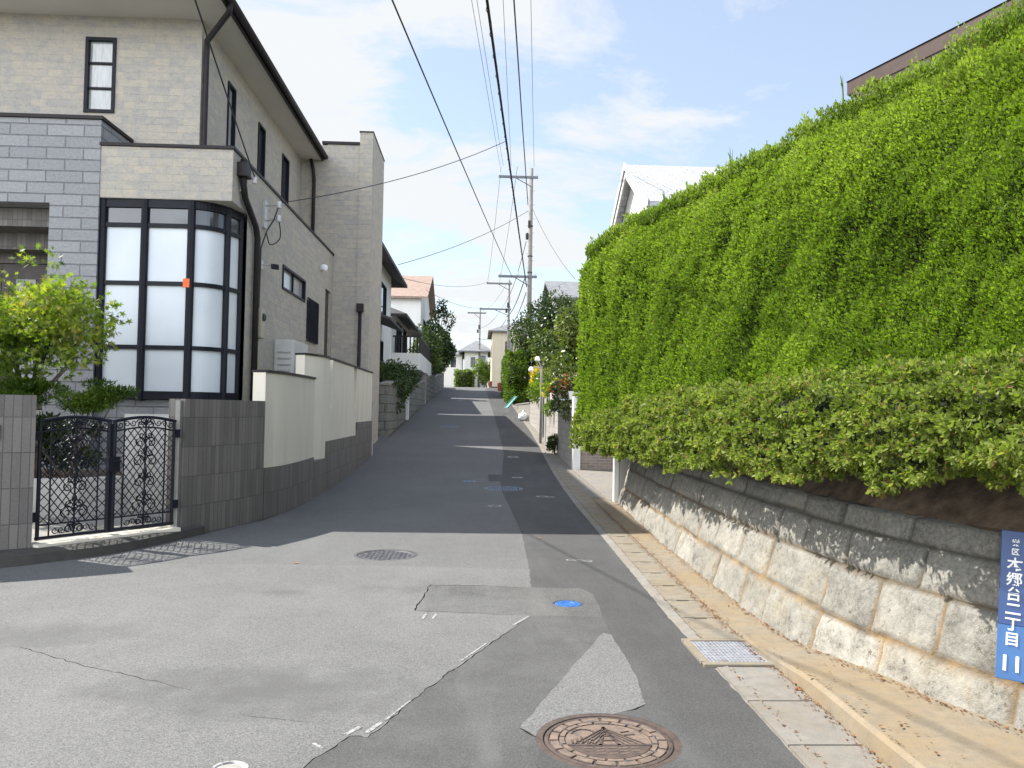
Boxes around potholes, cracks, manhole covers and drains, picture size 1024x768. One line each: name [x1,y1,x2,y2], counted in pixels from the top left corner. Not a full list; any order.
crack [13,645,192,691]
manhole cover [354,549,419,561]
manhole cover [536,713,682,768]
drain grate [681,638,774,668]
